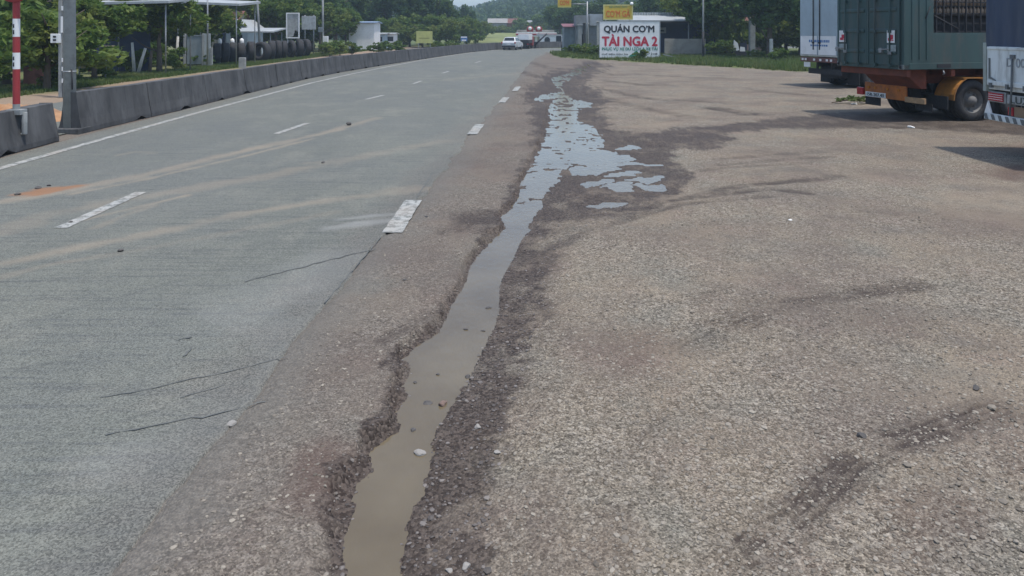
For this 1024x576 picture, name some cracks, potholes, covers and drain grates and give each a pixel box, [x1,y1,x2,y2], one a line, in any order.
pothole [306,63,650,576]
crack [100,356,287,435]
crack [245,248,376,282]
pothole [553,131,693,226]
